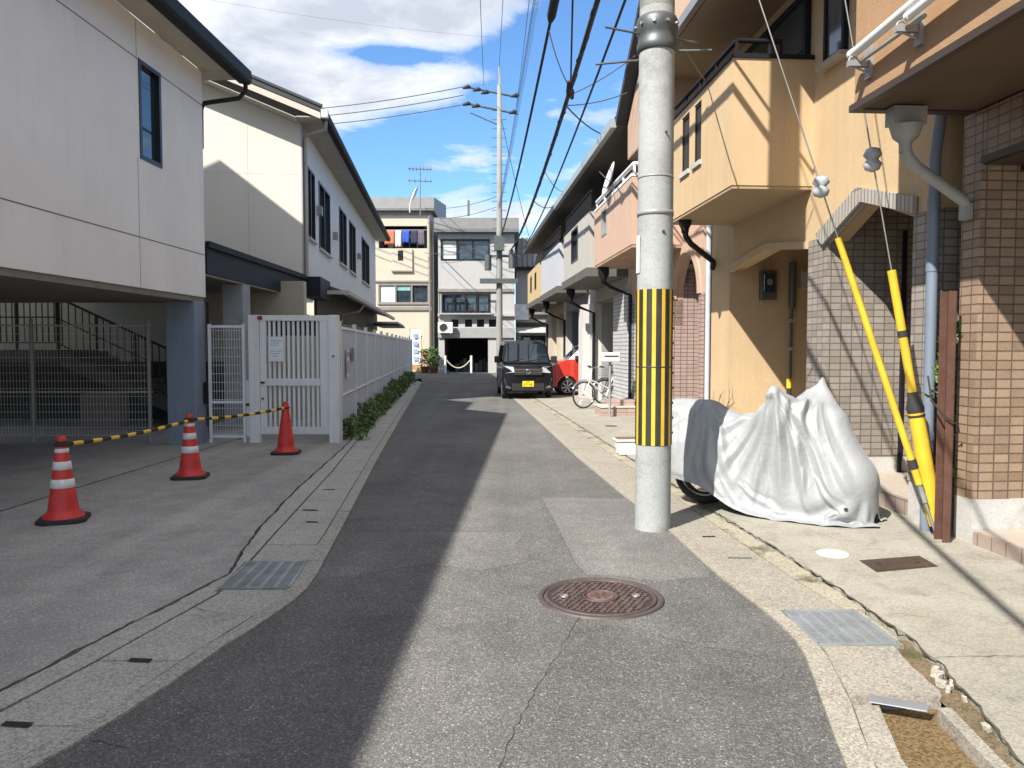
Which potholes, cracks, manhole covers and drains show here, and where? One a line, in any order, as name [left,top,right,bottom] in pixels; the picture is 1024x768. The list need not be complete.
drain grate [217,560,308,593]
drain grate [782,609,900,649]
crack [498,617,579,768]
manhole cover [538,577,664,620]
